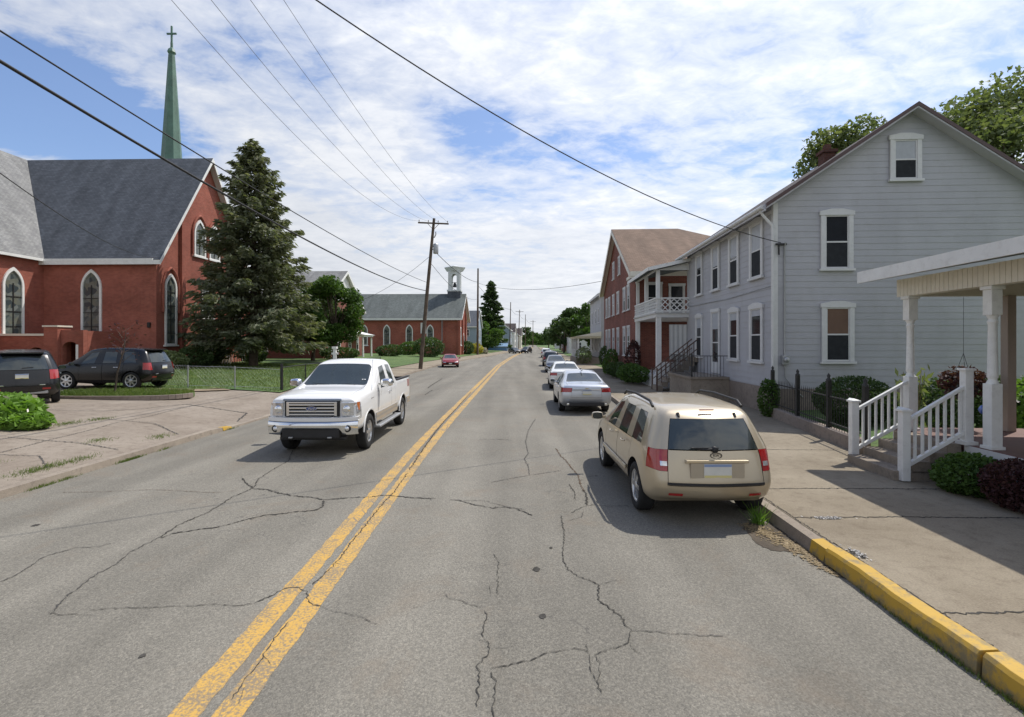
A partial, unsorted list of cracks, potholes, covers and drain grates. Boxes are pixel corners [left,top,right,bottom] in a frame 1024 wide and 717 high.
crack [2,392,471,624]
crack [414,419,722,716]
